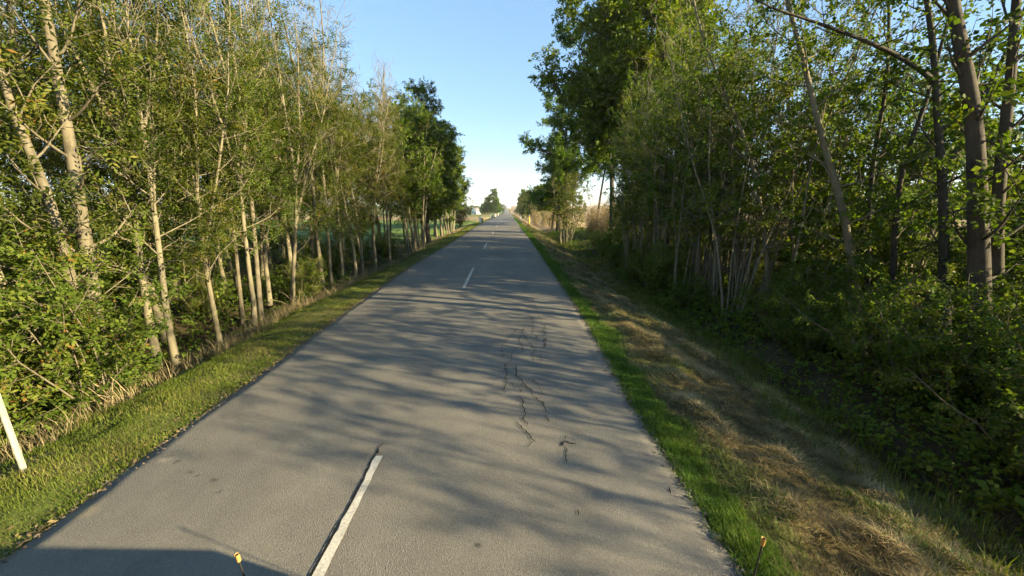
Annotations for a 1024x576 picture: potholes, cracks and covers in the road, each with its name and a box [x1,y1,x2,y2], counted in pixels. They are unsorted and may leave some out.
crack [500,293,575,463]
